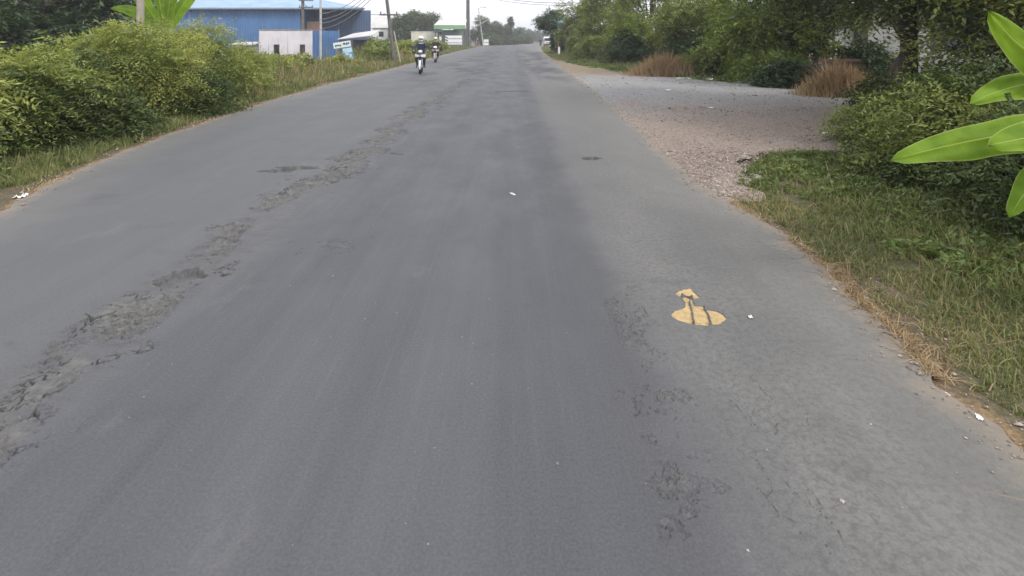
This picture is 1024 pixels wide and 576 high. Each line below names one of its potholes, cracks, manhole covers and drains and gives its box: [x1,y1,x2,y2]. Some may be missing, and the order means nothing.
pothole [142,263,223,295]
crack [0,76,471,479]
pothole [250,164,326,175]
crack [592,285,870,572]
